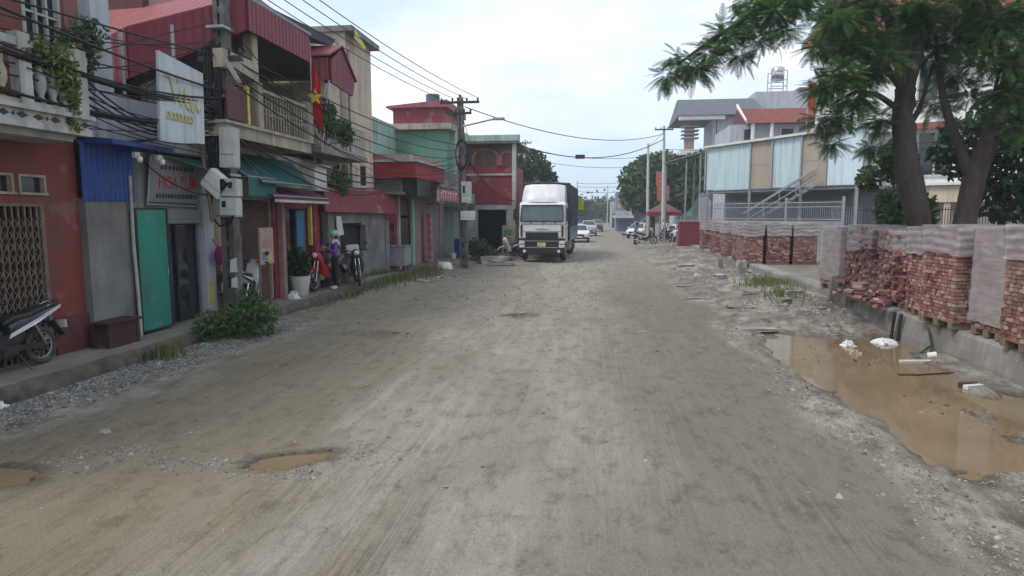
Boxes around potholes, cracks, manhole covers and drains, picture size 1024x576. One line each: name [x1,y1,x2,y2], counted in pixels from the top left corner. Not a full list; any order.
pothole [0,461,54,489]
pothole [229,447,346,473]
